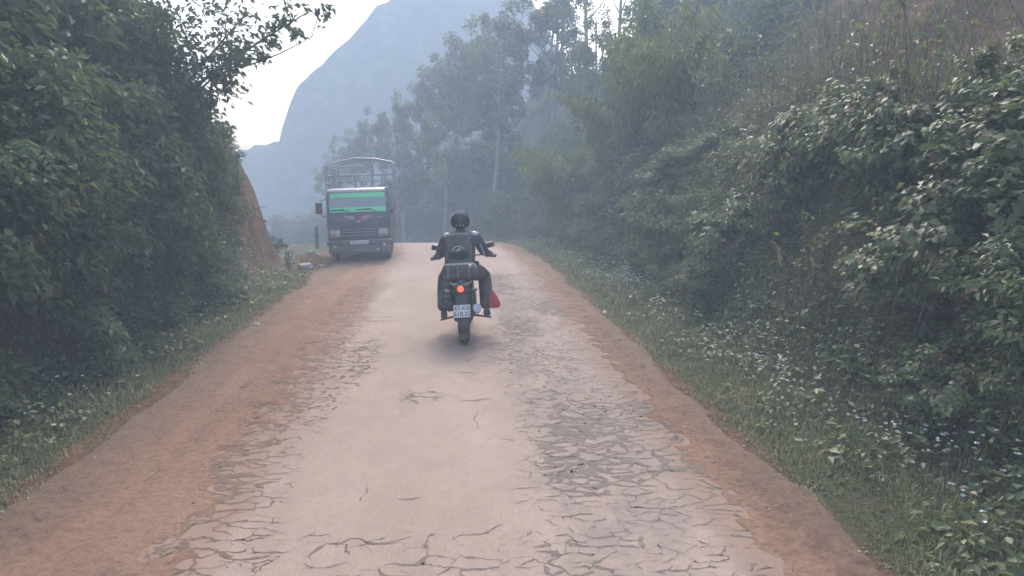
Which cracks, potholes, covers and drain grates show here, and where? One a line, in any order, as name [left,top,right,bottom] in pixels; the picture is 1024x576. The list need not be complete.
crack [399,387,442,404]
crack [478,273,799,576]
crack [297,522,510,576]
crack [66,281,392,576]
